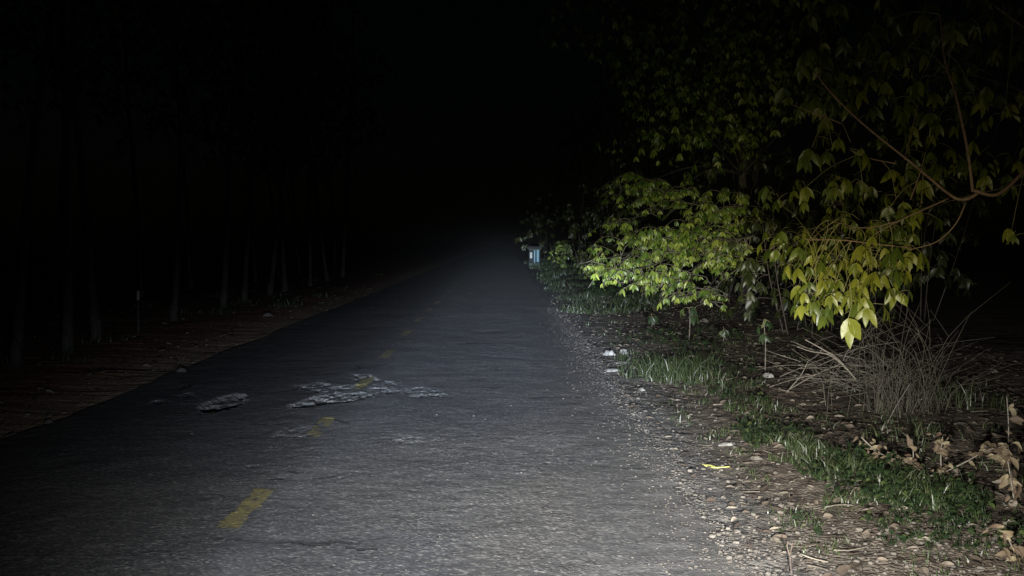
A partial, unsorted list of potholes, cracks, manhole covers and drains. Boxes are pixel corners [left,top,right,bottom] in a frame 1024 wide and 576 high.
pothole [399,387,448,398]
pothole [286,374,402,409]
crack [215,537,378,551]
pothole [195,393,249,413]
pothole [269,426,314,439]
